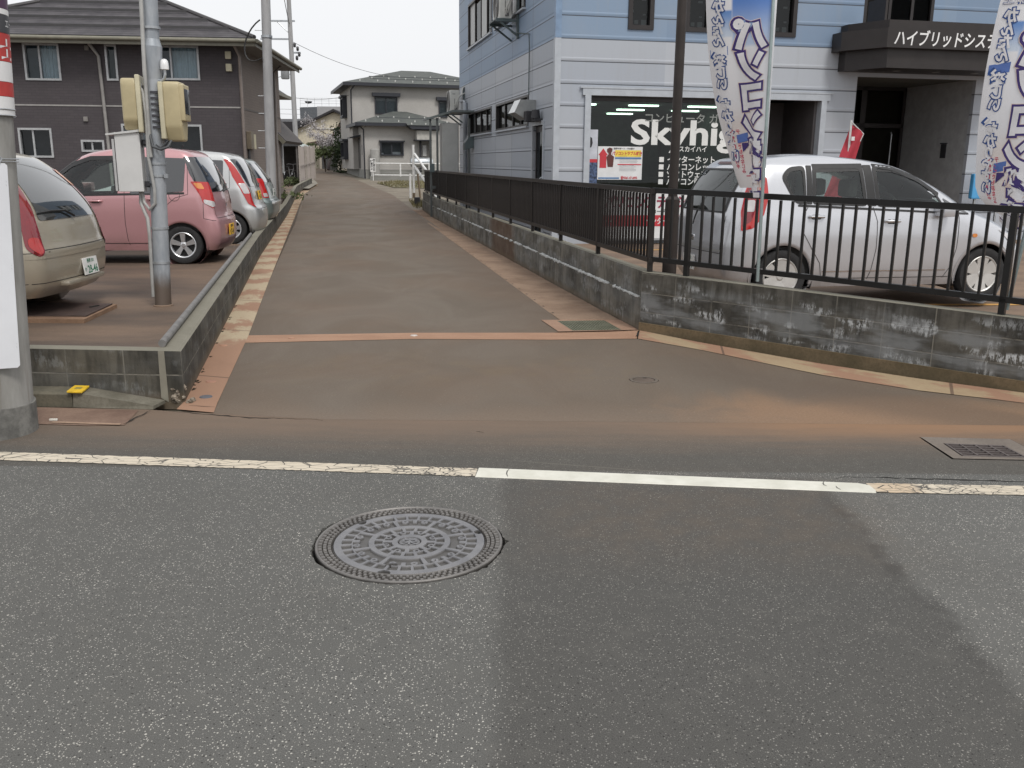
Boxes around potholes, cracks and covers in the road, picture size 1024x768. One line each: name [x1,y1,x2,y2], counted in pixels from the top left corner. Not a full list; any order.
drain grate [542,320,638,332]
drain grate [921,437,1024,461]
manhole cover [312,506,505,585]
